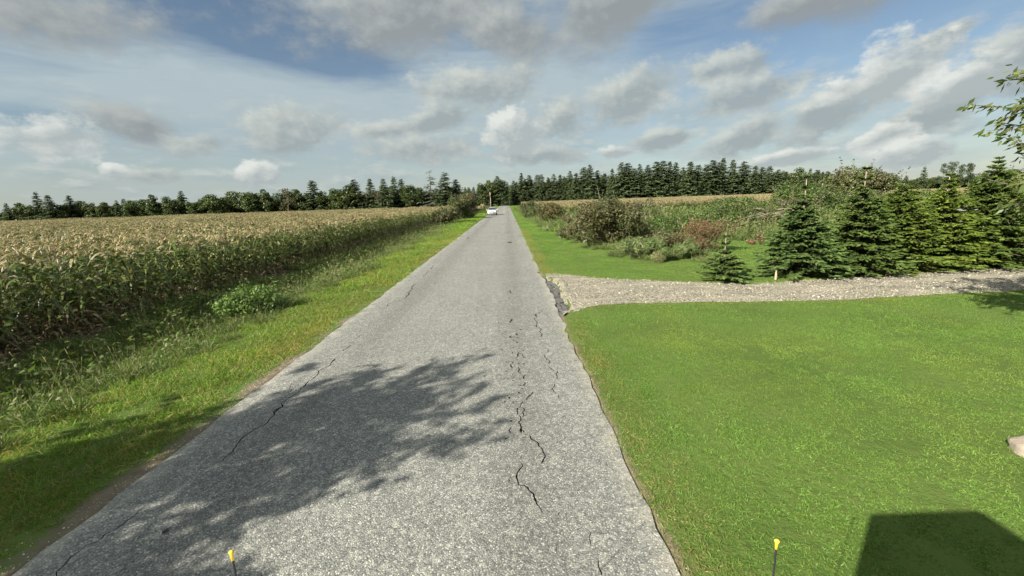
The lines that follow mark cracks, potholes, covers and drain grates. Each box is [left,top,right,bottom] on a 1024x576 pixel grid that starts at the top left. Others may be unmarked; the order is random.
crack [491,290,559,515]
